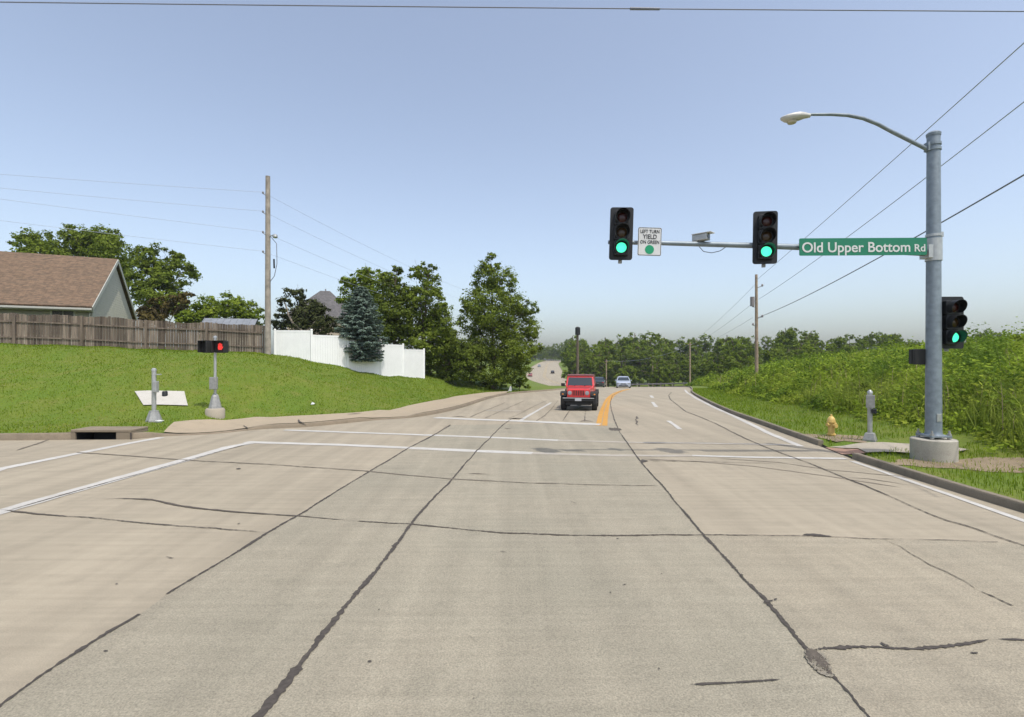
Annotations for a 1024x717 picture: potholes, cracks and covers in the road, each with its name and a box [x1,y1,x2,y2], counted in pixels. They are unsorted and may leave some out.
drain grate [71,426,148,440]
crack [818,638,1024,650]
crack [889,541,1012,605]
